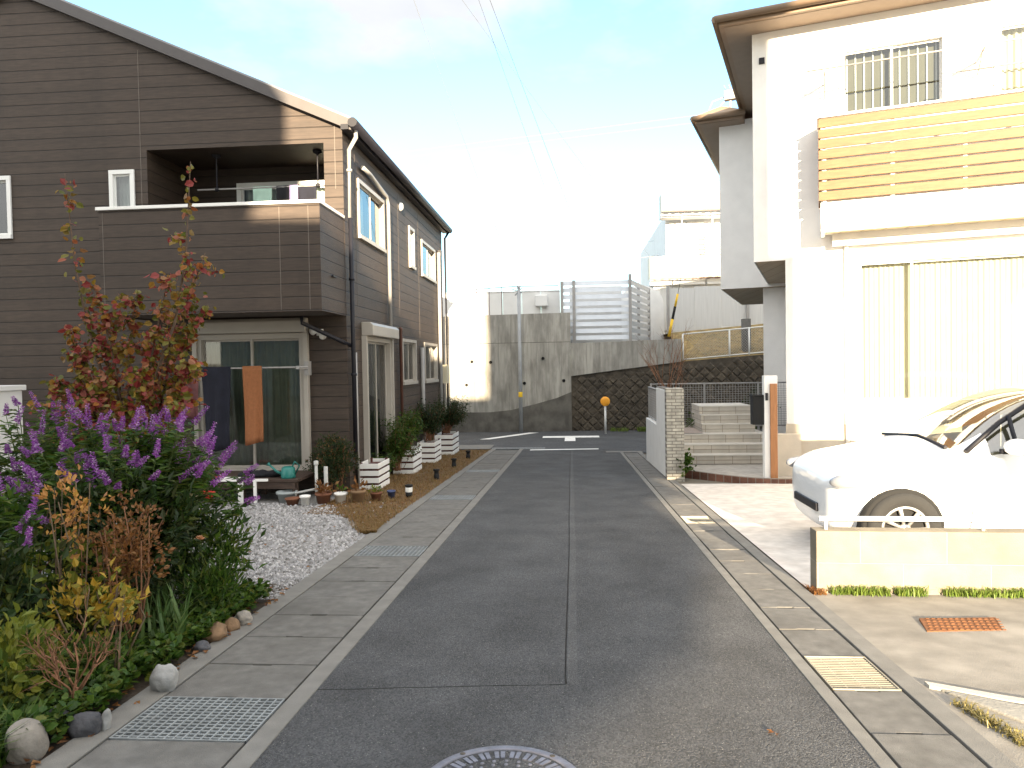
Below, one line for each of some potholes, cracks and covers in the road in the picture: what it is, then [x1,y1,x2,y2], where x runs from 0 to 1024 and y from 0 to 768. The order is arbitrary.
drain grate [680,516,715,524]
drain grate [108,696,285,746]
drain grate [804,656,902,693]
drain grate [353,546,428,557]
manhole cover [432,745,576,768]
